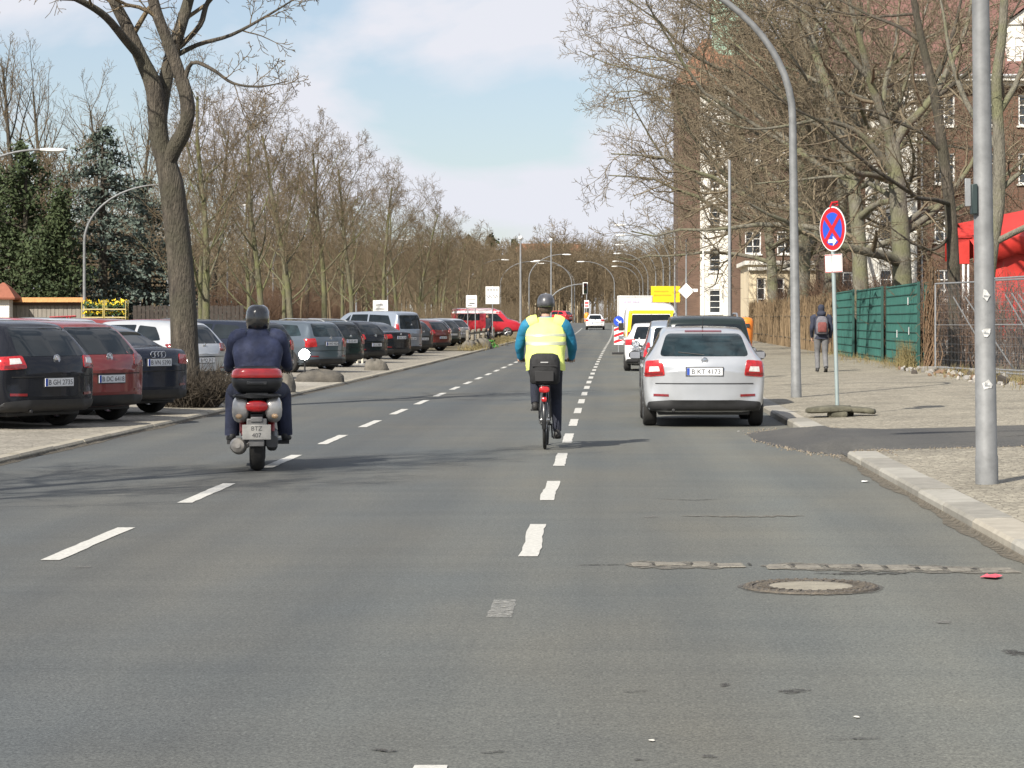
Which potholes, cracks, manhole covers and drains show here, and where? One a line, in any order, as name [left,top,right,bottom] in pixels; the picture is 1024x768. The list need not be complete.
manhole cover [738,578,884,595]
